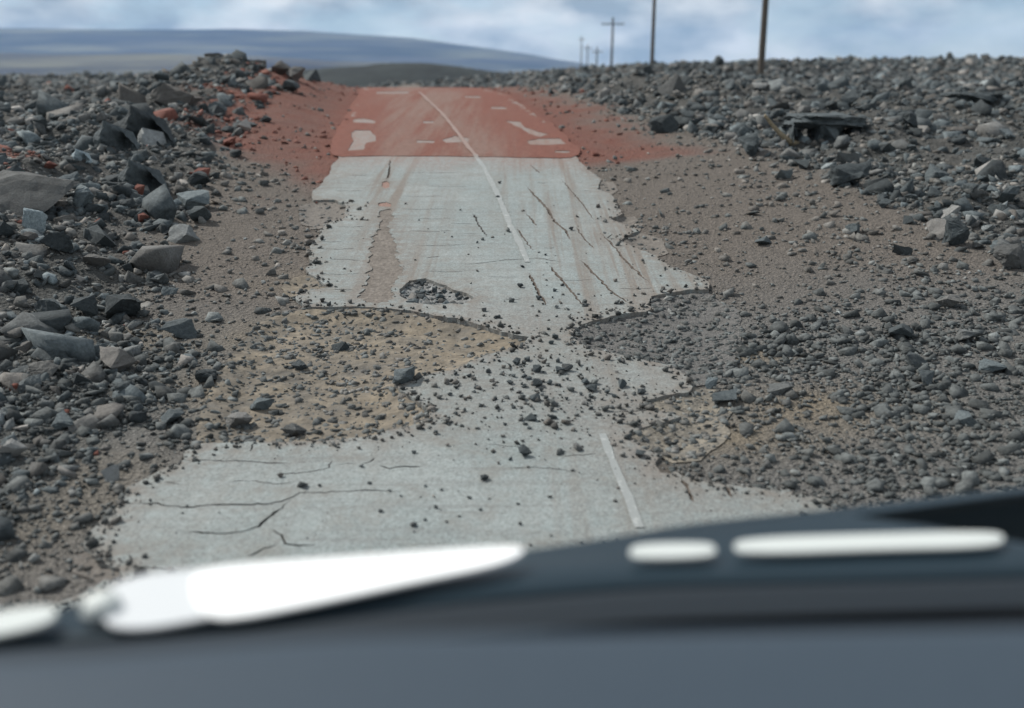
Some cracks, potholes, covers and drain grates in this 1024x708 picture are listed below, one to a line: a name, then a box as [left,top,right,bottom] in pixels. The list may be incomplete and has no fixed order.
crack [131,444,420,556]
crack [411,165,651,306]
pothole [400,281,472,305]
